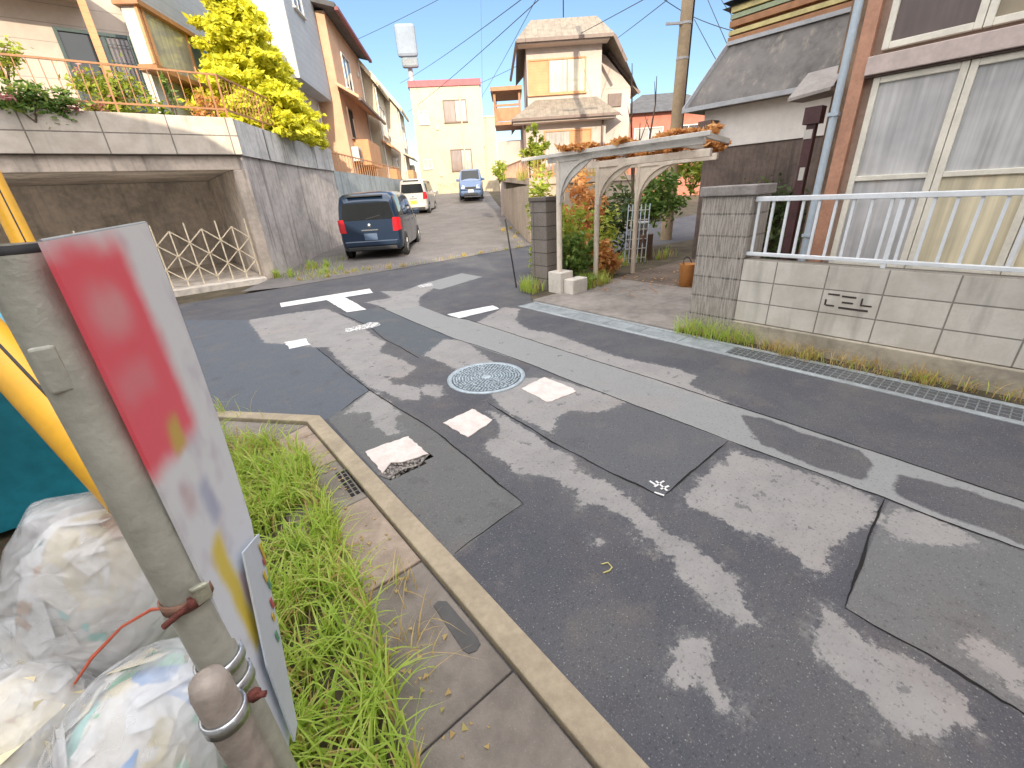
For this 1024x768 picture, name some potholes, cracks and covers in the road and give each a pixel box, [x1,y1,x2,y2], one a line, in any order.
manhole cover [447,362,525,394]
pothole [377,454,430,479]
